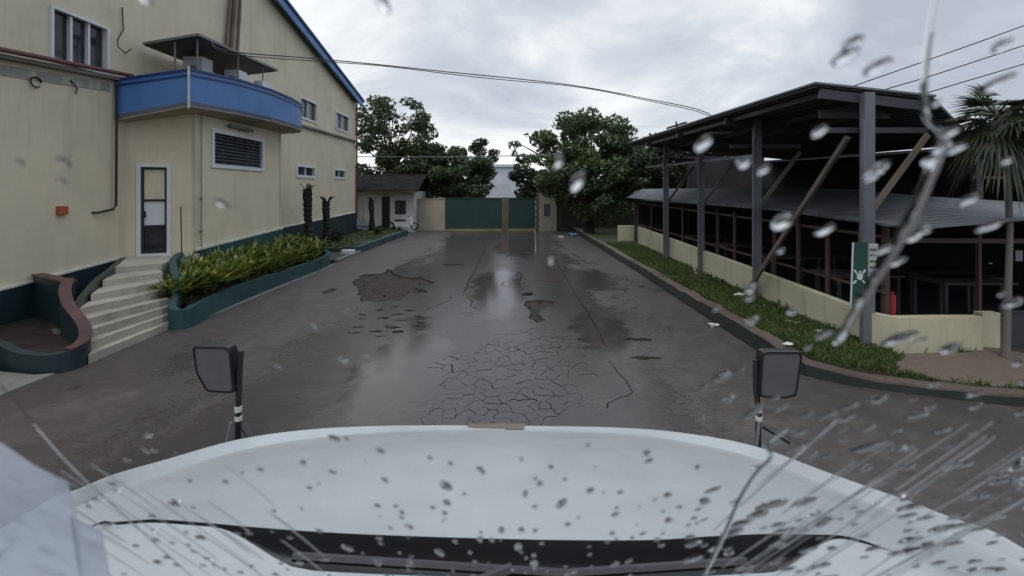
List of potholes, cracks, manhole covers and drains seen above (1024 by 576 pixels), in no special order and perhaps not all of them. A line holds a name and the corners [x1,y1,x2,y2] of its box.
pothole [524,300,554,323]
crack [405,248,633,426]
pothole [352,269,436,302]
